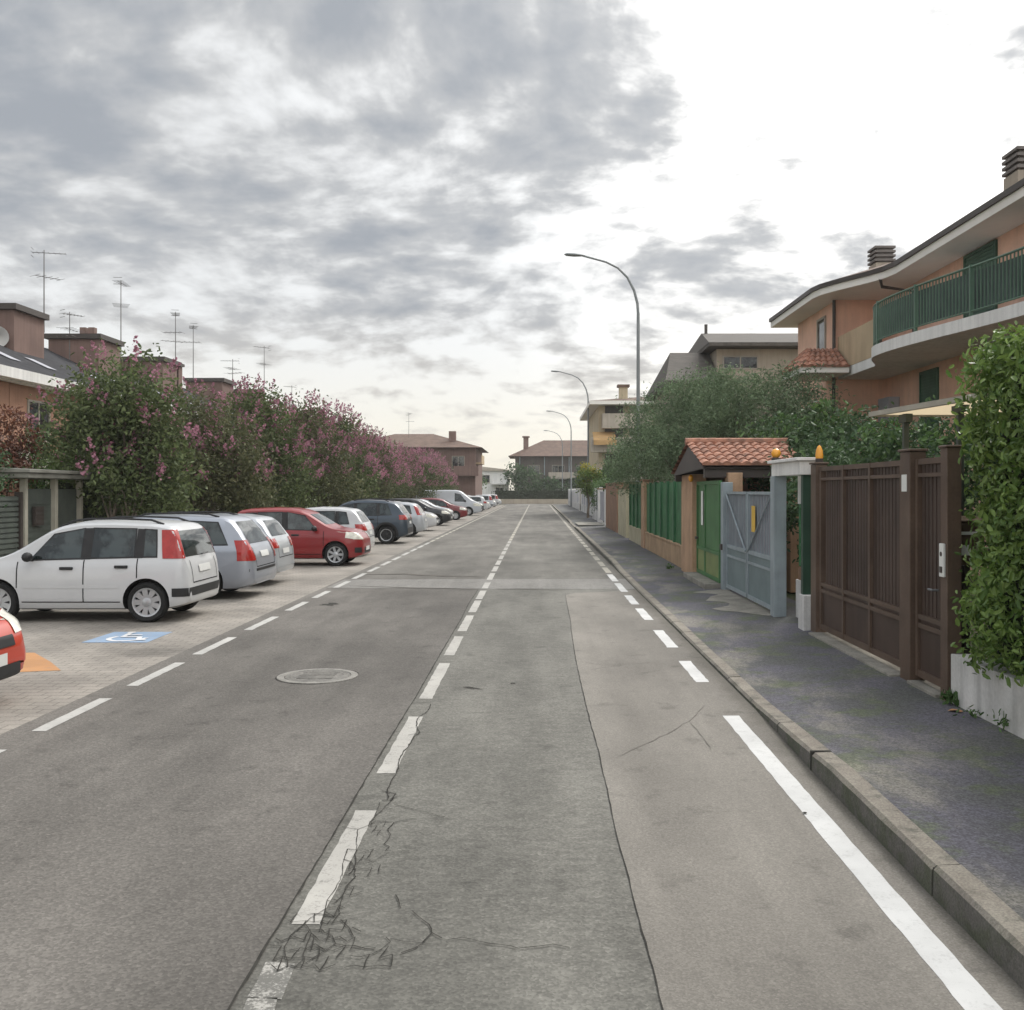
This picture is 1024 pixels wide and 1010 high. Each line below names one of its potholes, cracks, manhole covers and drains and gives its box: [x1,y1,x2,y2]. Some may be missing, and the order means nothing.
manhole cover [277,668,358,684]
crack [384,702,445,822]
crack [395,894,567,948]
crack [271,794,424,970]
